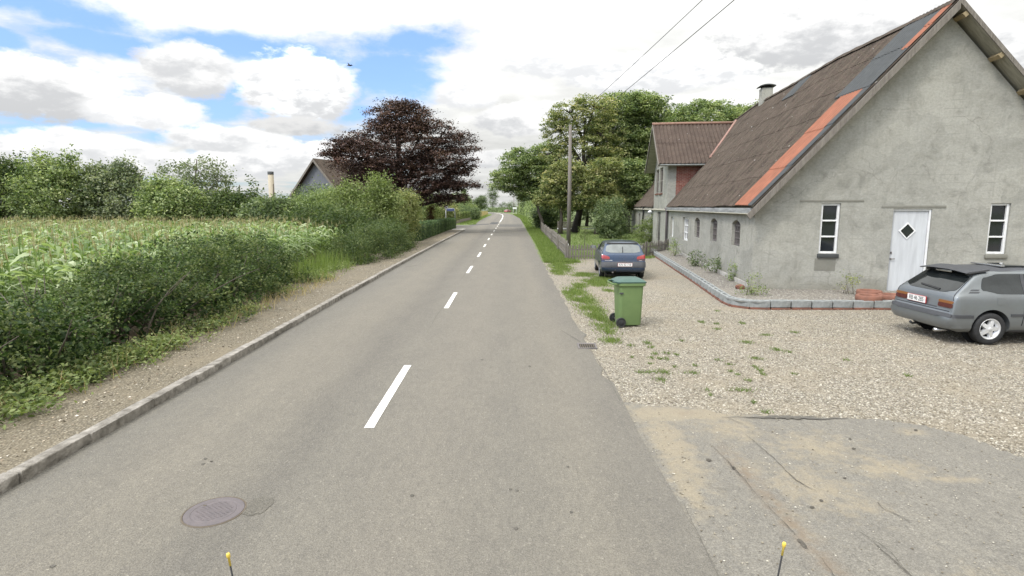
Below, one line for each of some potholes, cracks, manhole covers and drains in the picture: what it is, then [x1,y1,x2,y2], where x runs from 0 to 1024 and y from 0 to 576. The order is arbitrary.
manhole cover [180,496,247,528]
crack [728,415,844,491]
